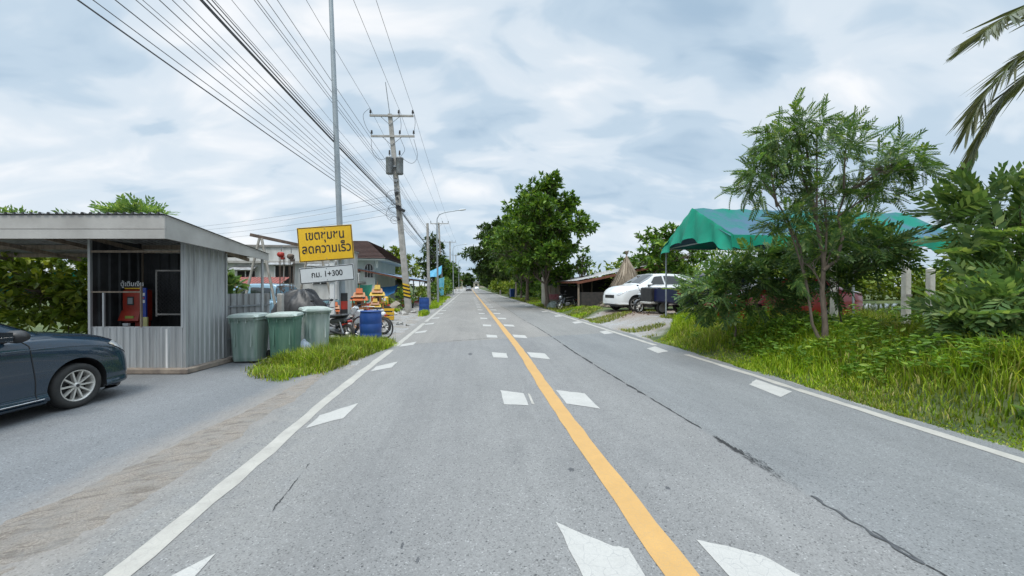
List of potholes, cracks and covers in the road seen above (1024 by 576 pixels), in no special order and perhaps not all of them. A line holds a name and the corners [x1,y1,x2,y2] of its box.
crack [493,301,947,576]
